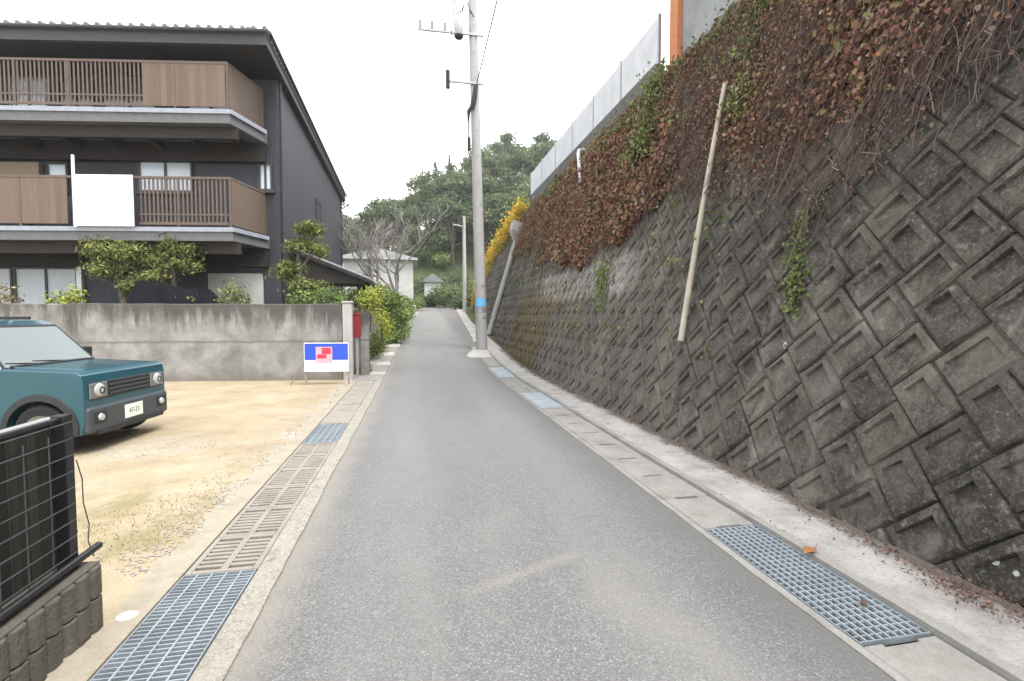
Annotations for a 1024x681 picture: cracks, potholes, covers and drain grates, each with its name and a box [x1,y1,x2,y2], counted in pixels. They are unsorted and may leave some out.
drain grate [90,569,256,681]
drain grate [302,424,348,444]
drain grate [705,525,931,647]
